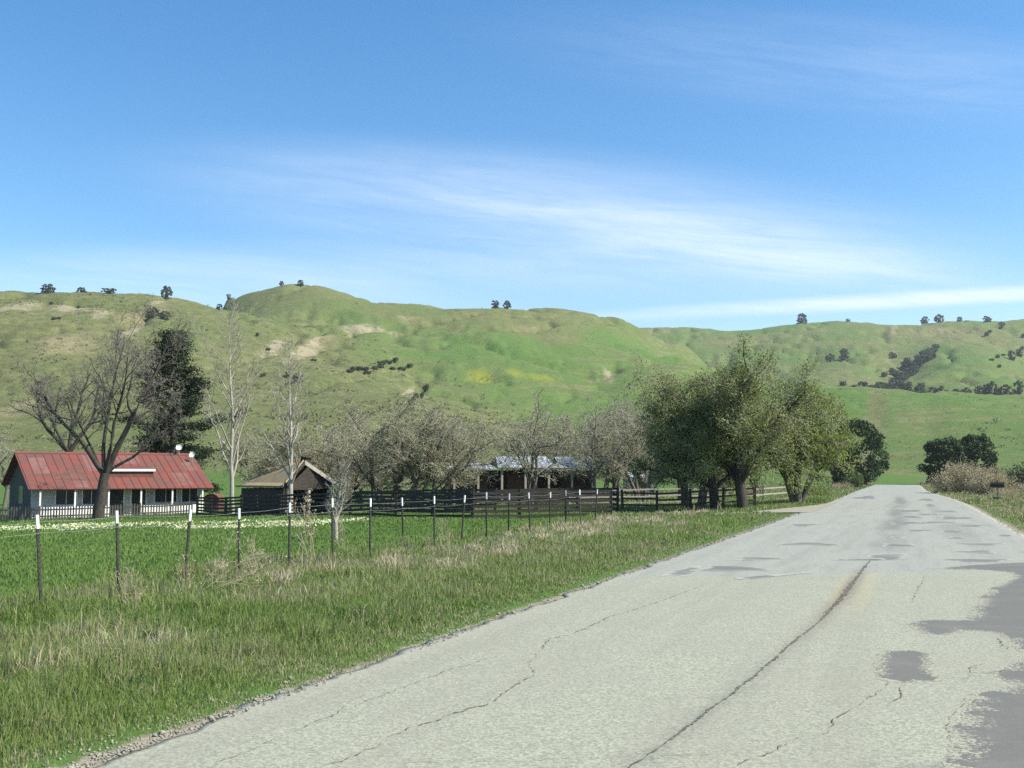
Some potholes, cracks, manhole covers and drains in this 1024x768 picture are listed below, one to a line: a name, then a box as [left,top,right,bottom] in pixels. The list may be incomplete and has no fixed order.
crack [390,559,905,768]
crack [317,661,535,768]
